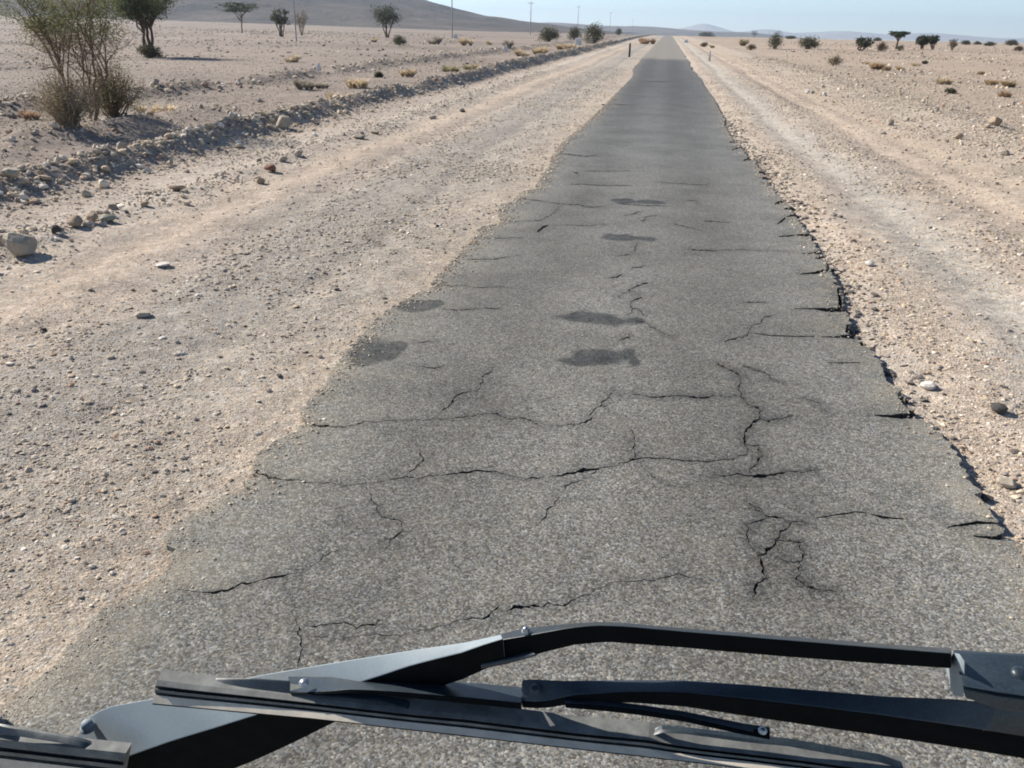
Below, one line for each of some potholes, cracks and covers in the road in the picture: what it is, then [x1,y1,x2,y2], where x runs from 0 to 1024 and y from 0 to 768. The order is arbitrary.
crack [254,363,827,551]
crack [725,301,851,342]
crack [476,199,603,239]
crack [611,244,670,341]
crack [177,550,338,594]
crack [746,503,903,600]
crack [287,573,701,666]
crack [691,141,850,317]
